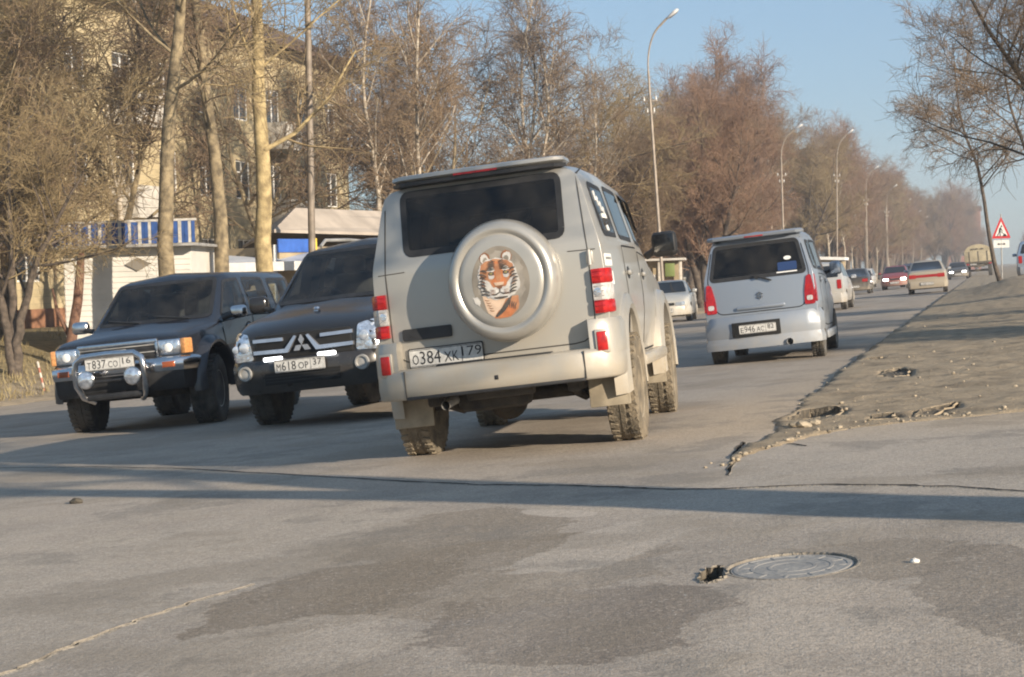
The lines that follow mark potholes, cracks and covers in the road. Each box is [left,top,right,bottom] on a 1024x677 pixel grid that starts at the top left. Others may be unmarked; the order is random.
pothole [788,405,845,421]
crack [0,583,255,676]
pothole [879,368,910,377]
manhole cover [722,552,861,580]
pothole [696,565,729,584]
pothole [913,401,959,417]
